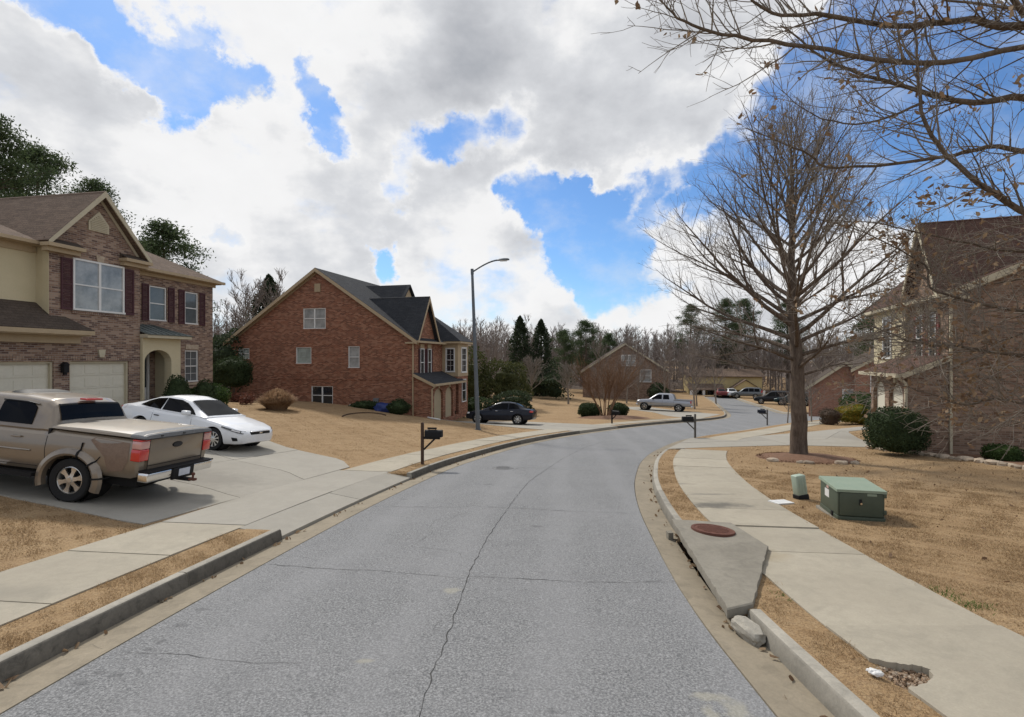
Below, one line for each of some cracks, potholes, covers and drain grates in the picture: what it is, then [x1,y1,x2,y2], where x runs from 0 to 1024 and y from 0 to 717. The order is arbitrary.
crack [275,440,667,717]
pothole [876,666,931,691]
